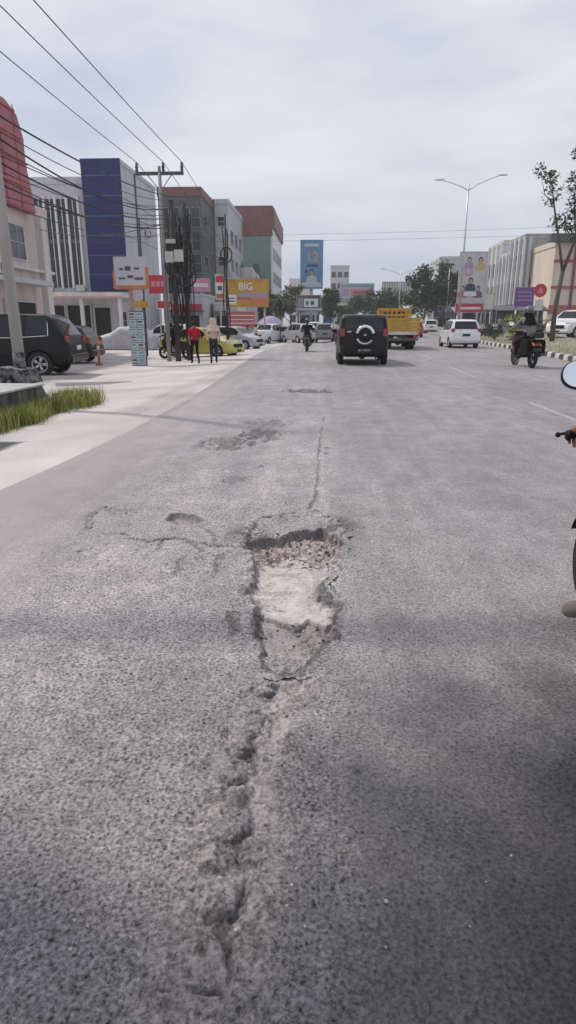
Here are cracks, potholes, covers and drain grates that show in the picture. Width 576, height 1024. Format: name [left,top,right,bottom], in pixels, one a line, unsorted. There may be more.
pothole [218,508,366,684]
pothole [193,436,258,450]
crack [306,415,355,600]
crack [97,666,339,1024]
pothole [162,512,207,533]
crack [74,504,255,580]
